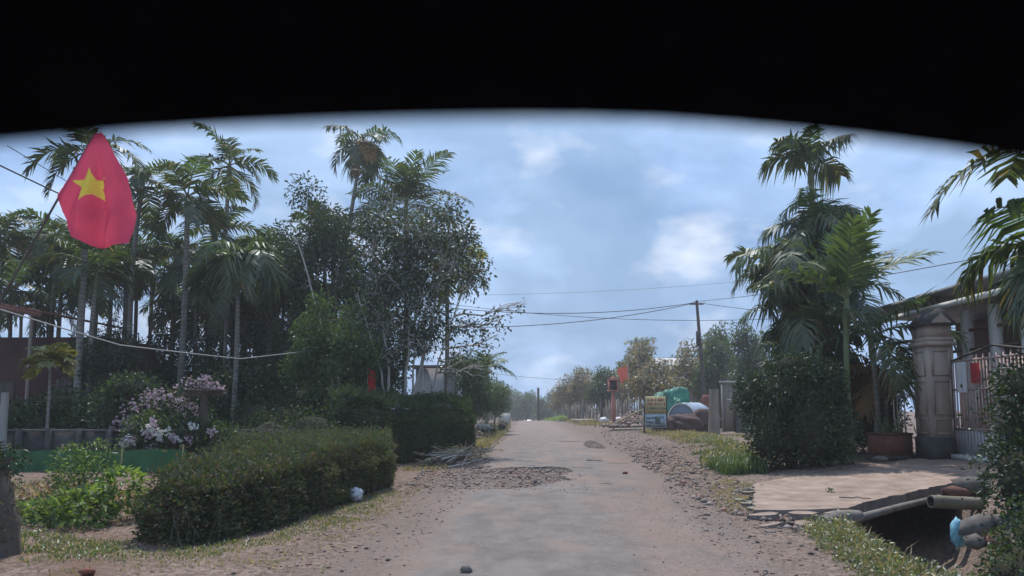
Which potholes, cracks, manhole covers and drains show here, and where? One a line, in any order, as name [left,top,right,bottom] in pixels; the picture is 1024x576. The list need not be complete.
pothole [583,441,606,449]
pothole [453,466,573,489]
